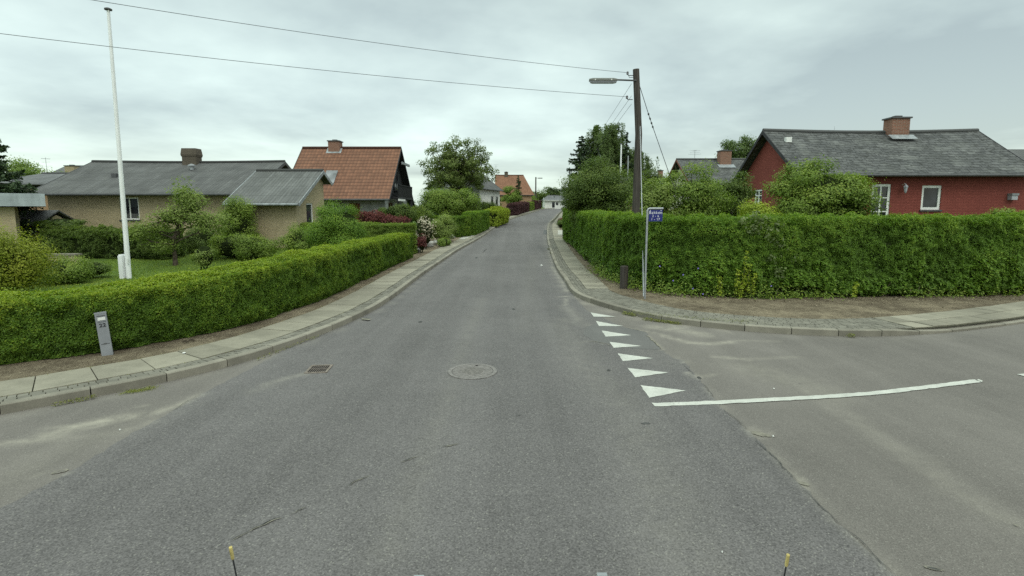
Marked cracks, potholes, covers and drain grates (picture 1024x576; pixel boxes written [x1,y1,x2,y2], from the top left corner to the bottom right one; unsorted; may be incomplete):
manhole cover [448,363,497,380]
drain grate [304,364,333,374]
